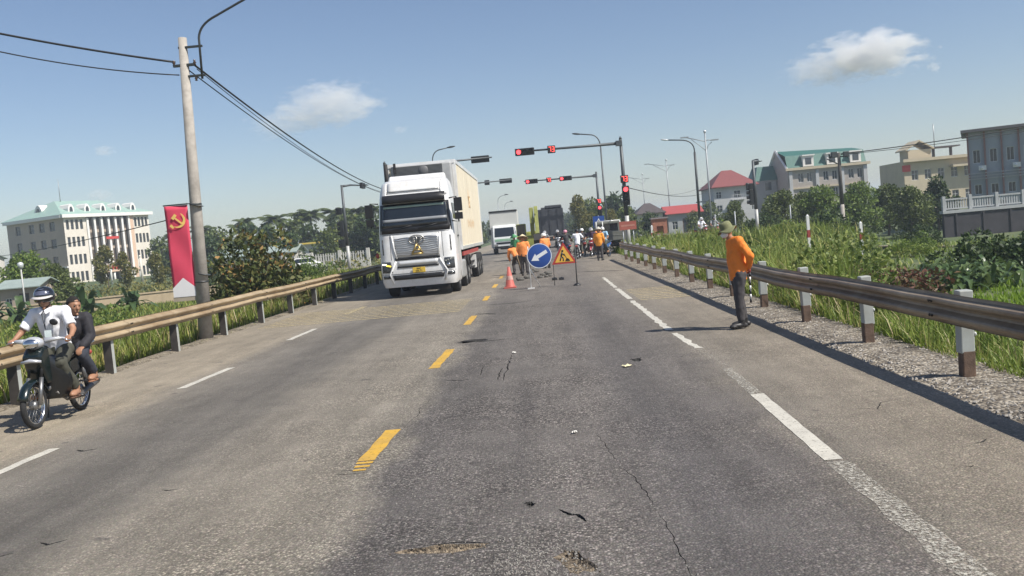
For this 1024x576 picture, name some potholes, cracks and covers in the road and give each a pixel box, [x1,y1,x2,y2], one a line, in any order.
crack [463,339,512,380]
crack [596,434,691,575]
crack [559,509,587,522]
pothole [553,550,601,575]
pothole [389,541,499,555]
